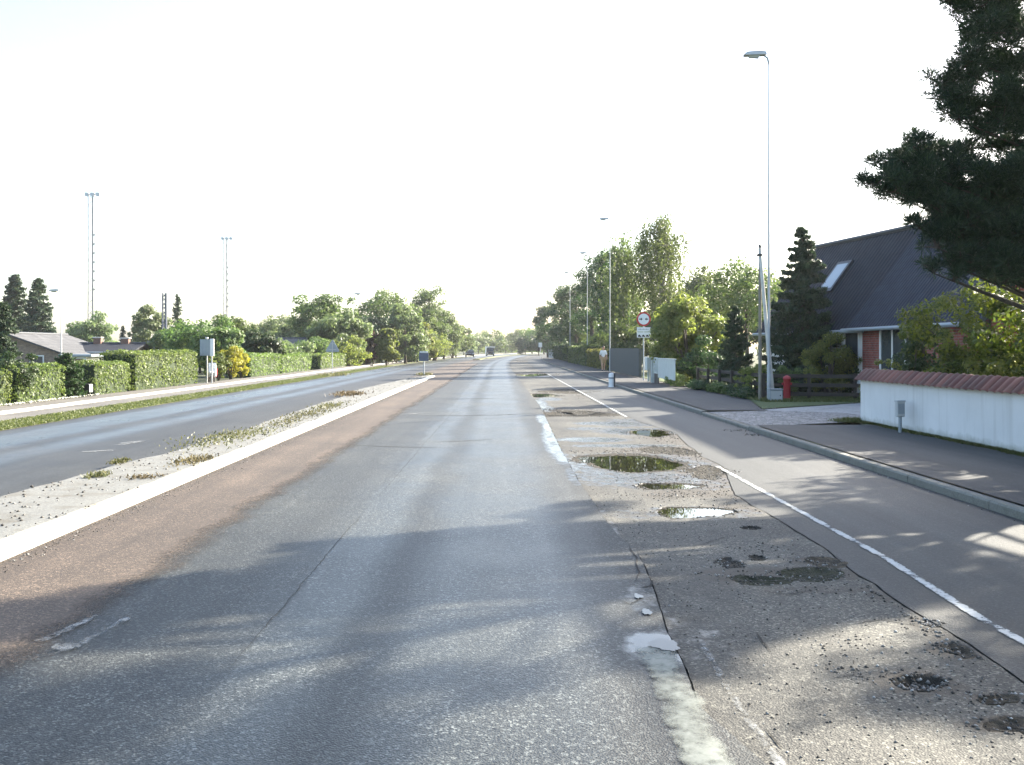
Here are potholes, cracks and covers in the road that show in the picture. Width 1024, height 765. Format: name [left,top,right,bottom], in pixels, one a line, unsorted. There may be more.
pothole [982,716,1024,734]
pothole [730,575,798,586]
pothole [651,507,741,519]
pothole [775,567,845,582]
pothole [567,453,693,474]
pothole [891,674,947,692]
pothole [978,694,1020,705]
pothole [804,556,848,569]
